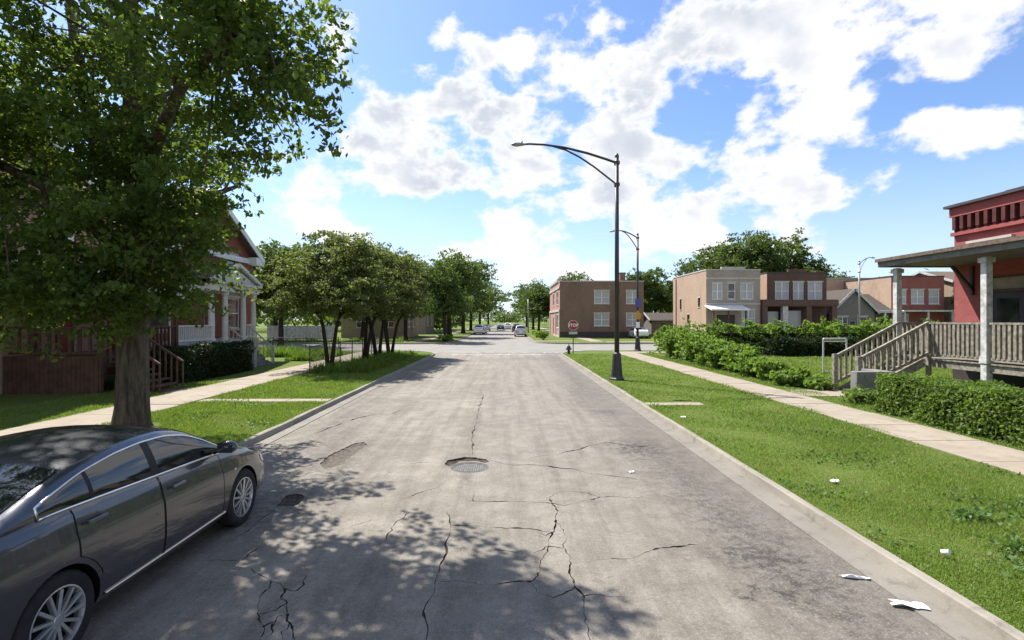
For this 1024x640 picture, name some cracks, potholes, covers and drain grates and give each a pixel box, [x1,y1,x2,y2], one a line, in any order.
manhole cover [451,462,489,473]
pothole [320,442,367,468]
crack [495,442,646,480]
crack [422,491,651,640]
pothole [277,494,304,506]
crack [210,508,306,640]
crack [611,544,709,559]
